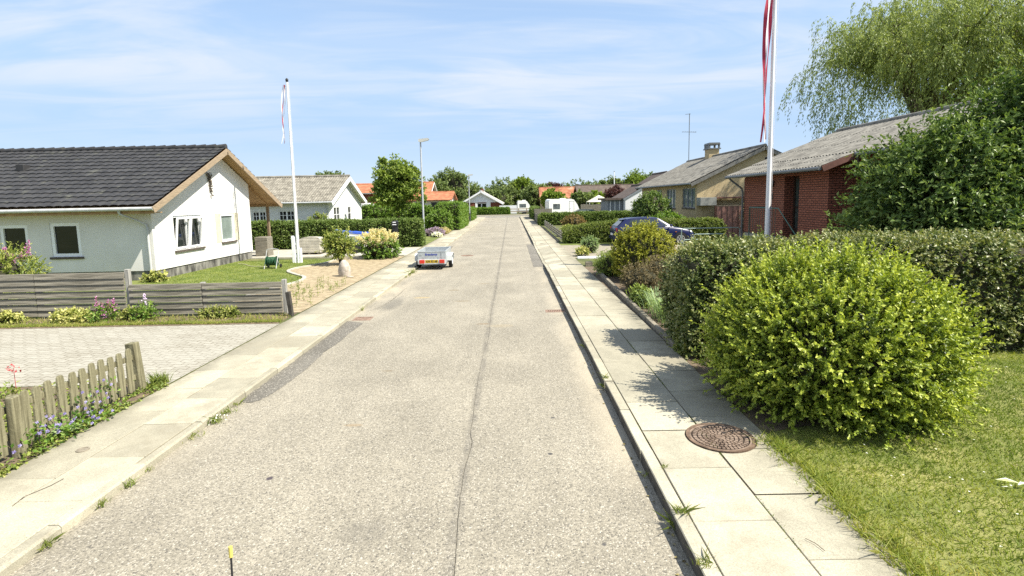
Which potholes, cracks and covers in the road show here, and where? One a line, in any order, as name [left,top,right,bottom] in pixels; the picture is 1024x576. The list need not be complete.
crack [453,221,507,576]
manhole cover [686,423,756,454]
